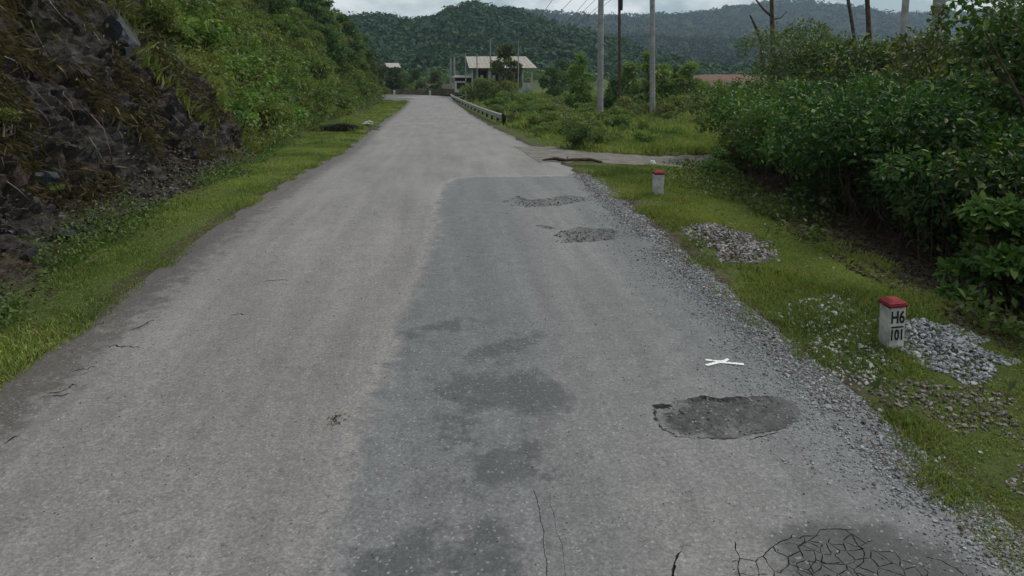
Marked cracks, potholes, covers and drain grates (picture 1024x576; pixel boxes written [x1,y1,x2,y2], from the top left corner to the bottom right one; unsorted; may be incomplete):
pothole [552,227,622,243]
crack [671,551,682,576]
pothole [652,395,802,440]
crack [732,529,966,576]
crack [49,366,96,397]
pothole [504,195,595,207]
crack [533,490,566,576]
